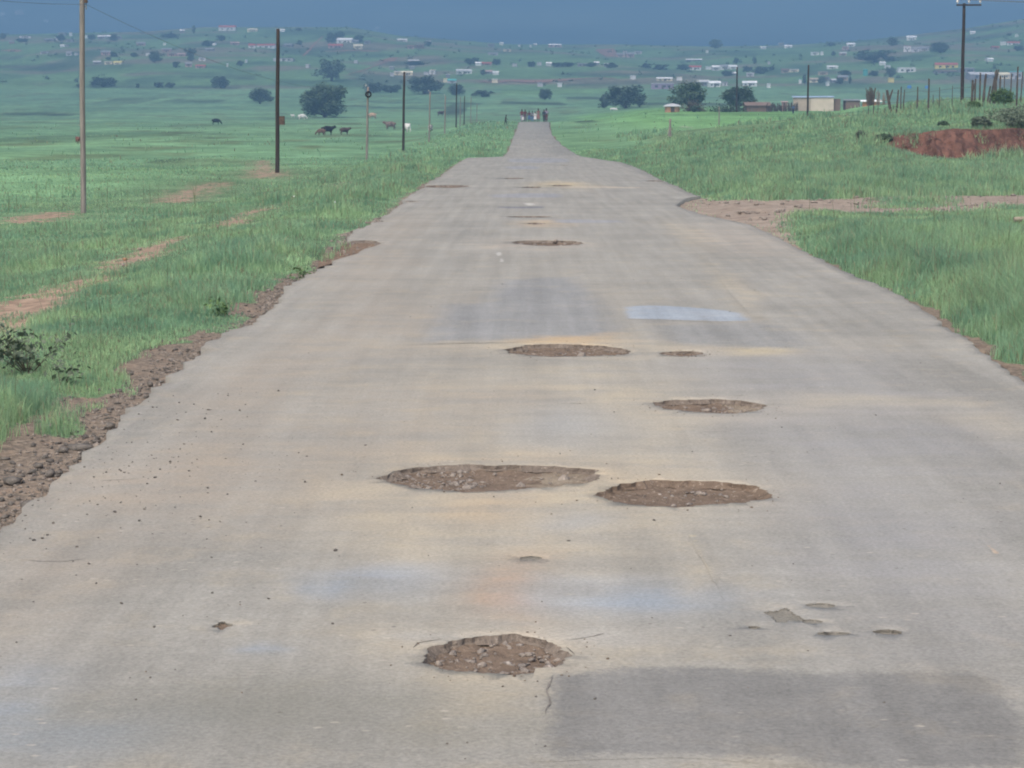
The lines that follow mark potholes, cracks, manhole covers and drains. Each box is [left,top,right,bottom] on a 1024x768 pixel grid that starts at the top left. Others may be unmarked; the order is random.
pothole [595,480,773,508]
pothole [376,464,600,492]
pothole [504,344,631,357]
pothole [652,399,766,414]
crack [545,675,553,714]
pothole [764,608,805,623]
pothole [421,634,573,675]
